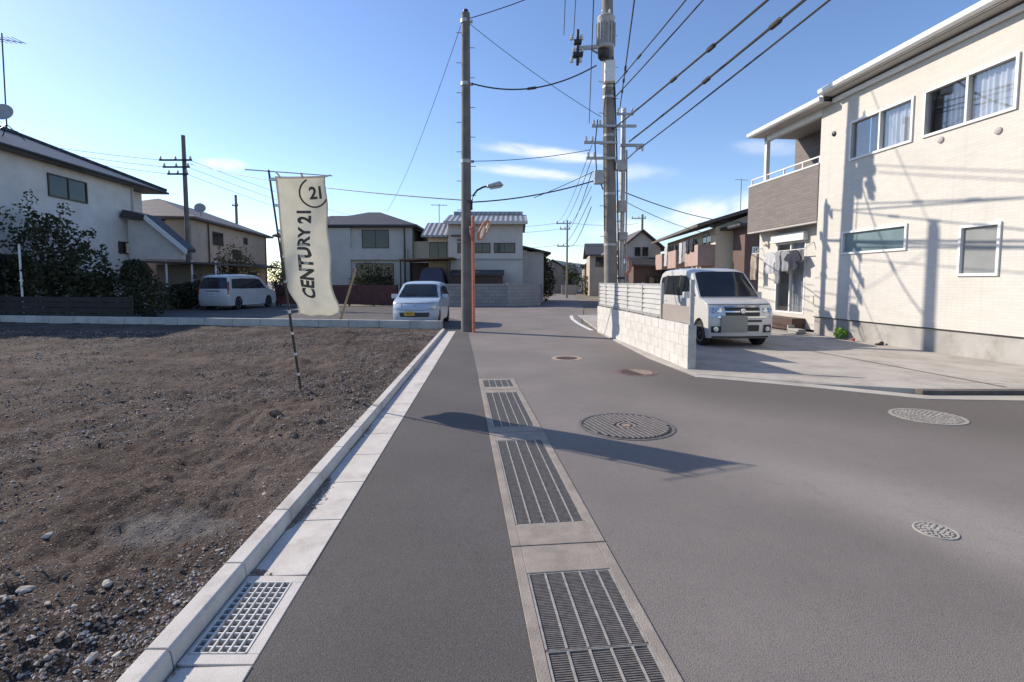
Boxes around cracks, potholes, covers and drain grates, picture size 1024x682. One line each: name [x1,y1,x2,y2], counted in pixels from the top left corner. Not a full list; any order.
manhole cover [888,408,970,426]
drain grate [485,392,535,427]
drain grate [527,569,648,654]
manhole cover [912,521,960,540]
drain grate [546,644,669,682]
manhole cover [579,413,676,441]
drain grate [497,440,585,525]
drain grate [189,582,292,654]
